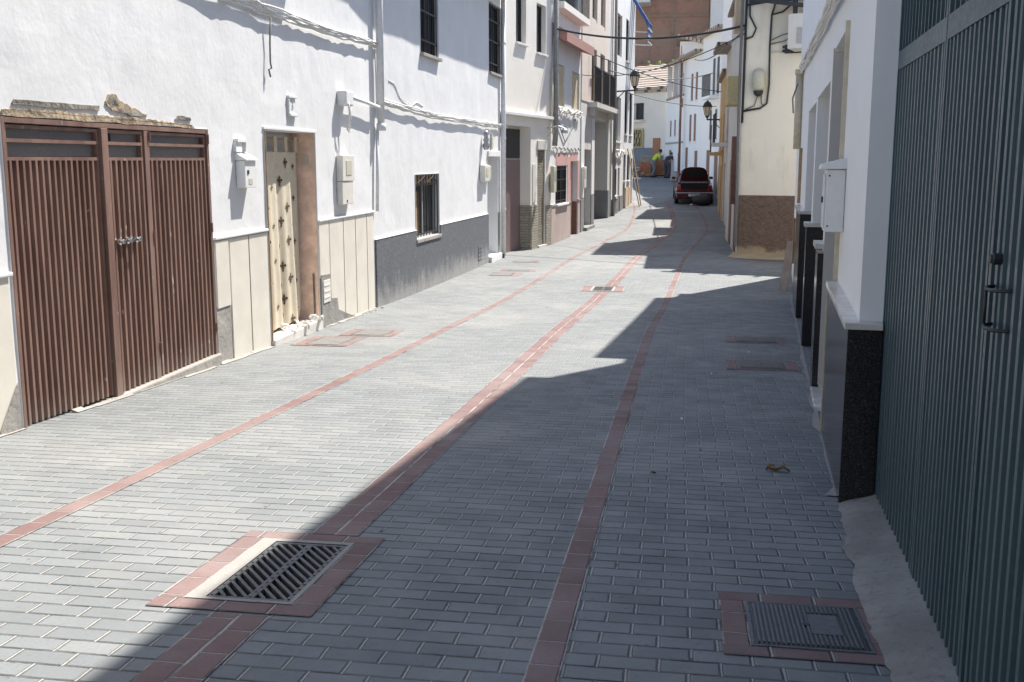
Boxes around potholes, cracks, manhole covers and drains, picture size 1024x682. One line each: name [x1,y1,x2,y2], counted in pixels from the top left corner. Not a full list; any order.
manhole cover [718,591,885,665]
manhole cover [724,336,789,344]
manhole cover [725,359,802,371]
manhole cover [340,329,404,337]
drain grate [146,530,385,617]
manhole cover [291,336,366,346]
